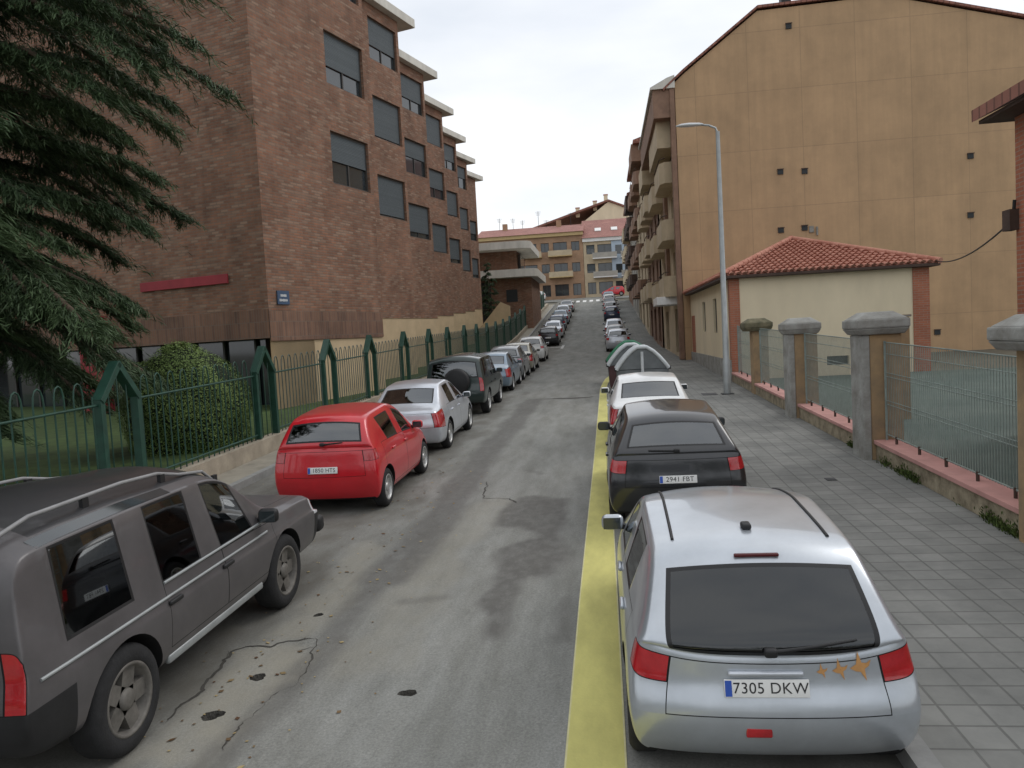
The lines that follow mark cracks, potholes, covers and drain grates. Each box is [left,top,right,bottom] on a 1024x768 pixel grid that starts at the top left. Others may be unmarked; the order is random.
pothole [189,706,237,727]
crack [165,638,318,749]
